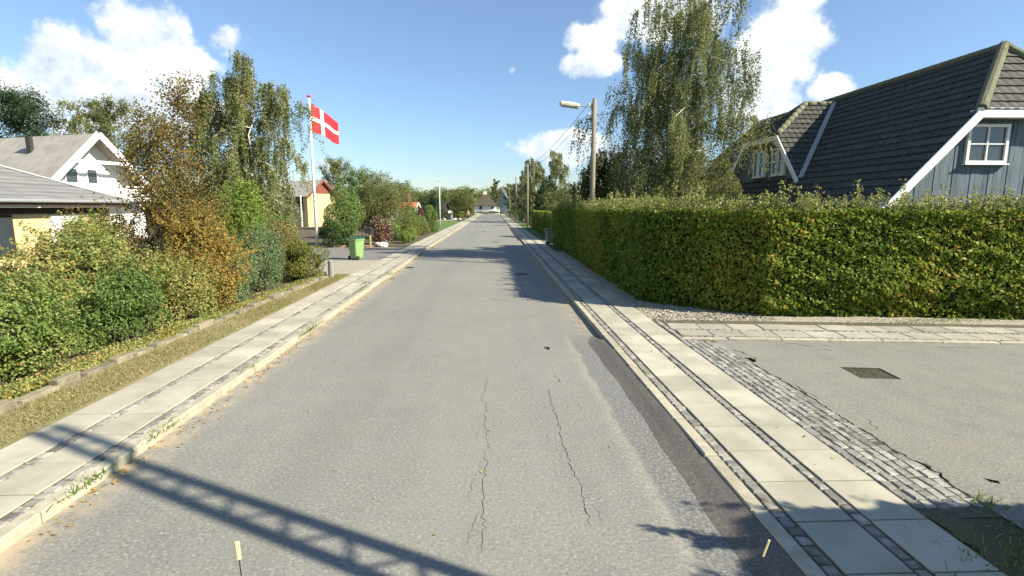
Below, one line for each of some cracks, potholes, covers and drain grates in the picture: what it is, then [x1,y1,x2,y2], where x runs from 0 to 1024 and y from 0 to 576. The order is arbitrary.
crack [548,374,603,525]
crack [468,380,489,554]
